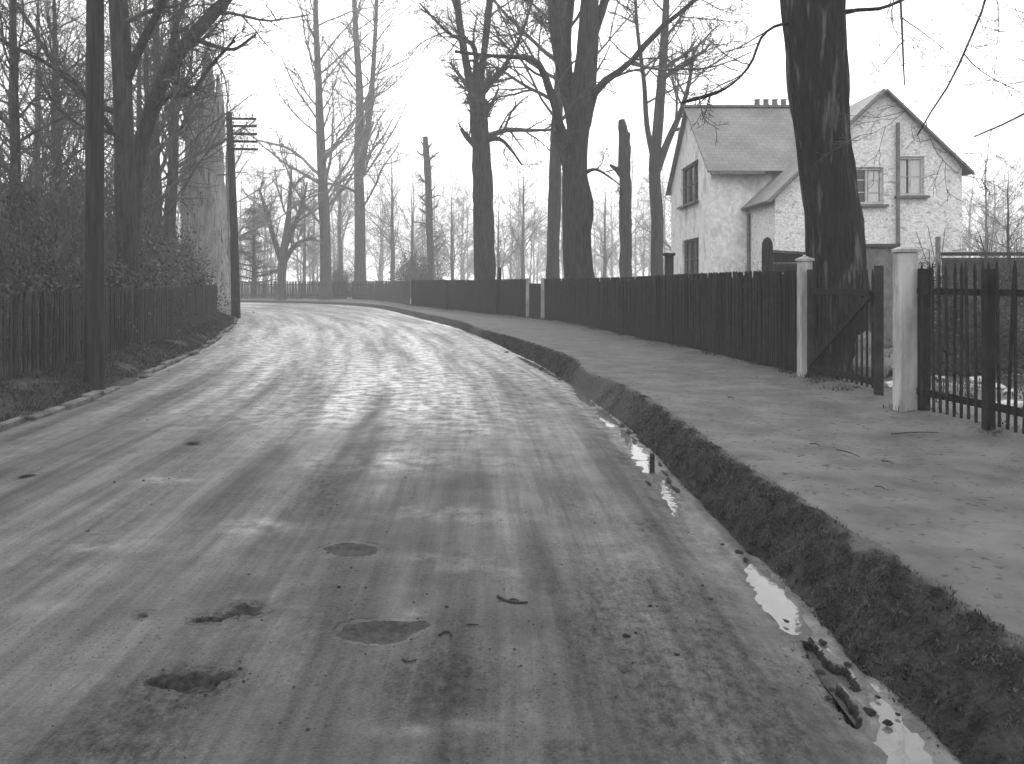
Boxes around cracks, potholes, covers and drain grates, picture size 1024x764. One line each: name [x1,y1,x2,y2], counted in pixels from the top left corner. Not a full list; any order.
pothole [130,611,154,621]
pothole [317,541,386,559]
pothole [133,666,247,699]
pothole [328,617,437,649]
pothole [11,473,41,481]
pothole [183,600,272,626]
